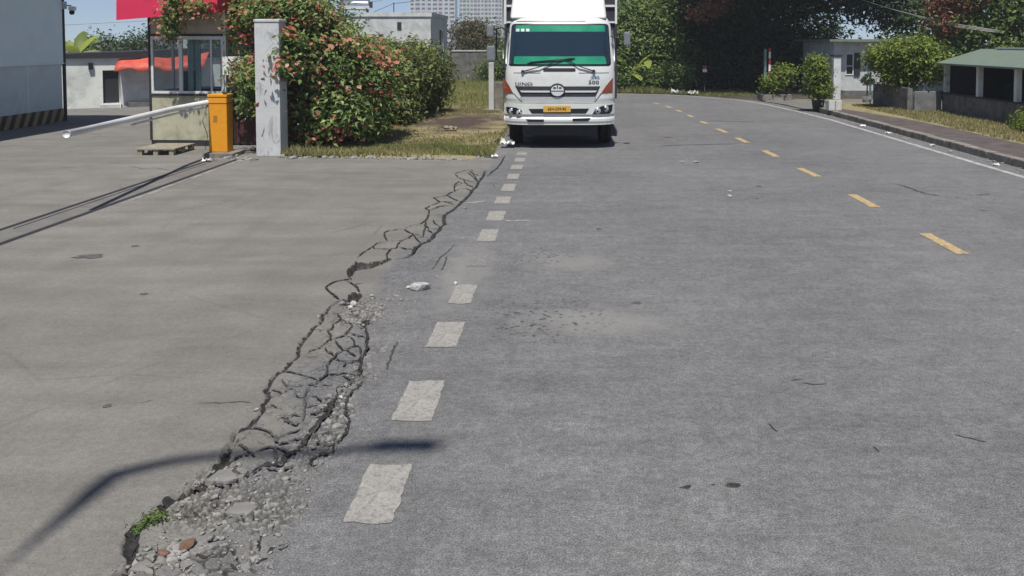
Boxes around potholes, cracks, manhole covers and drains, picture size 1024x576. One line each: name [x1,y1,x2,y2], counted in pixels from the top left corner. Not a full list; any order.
crack [358,169,495,270]
crack [122,277,398,576]
